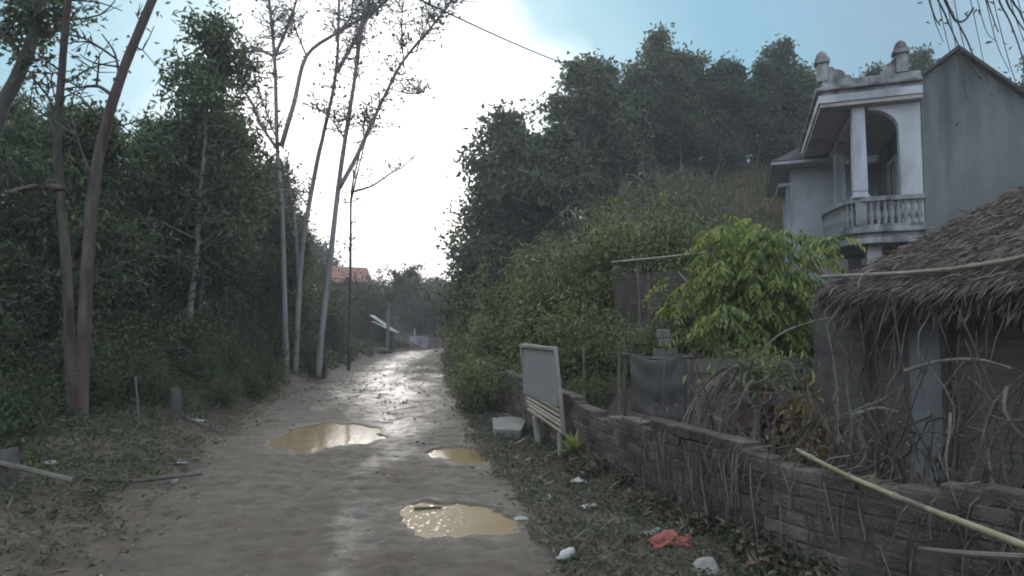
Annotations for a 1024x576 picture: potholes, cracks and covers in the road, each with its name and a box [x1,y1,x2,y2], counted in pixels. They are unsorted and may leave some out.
pothole [424,445,494,465]
pothole [394,499,524,538]
pothole [263,422,389,453]
